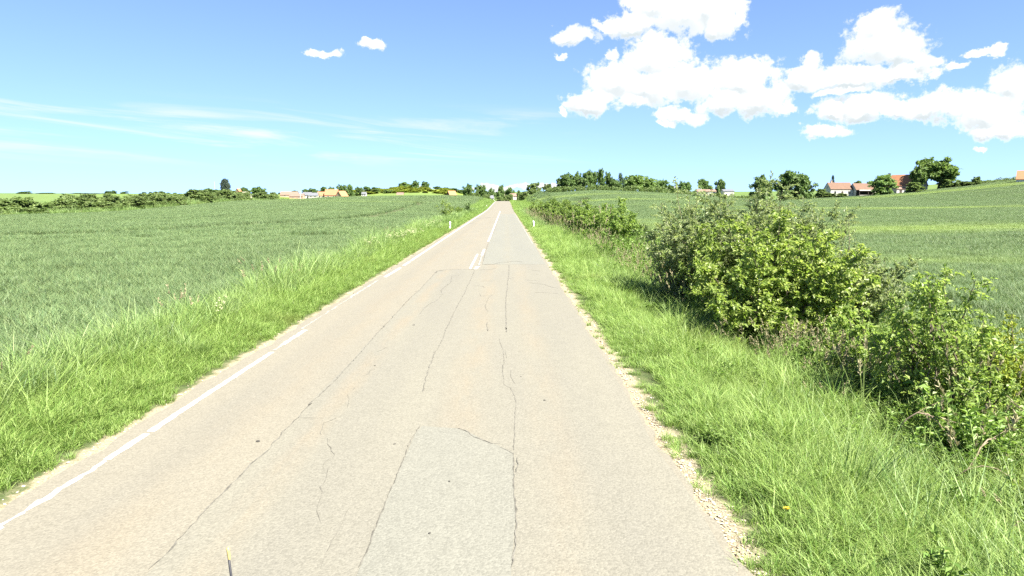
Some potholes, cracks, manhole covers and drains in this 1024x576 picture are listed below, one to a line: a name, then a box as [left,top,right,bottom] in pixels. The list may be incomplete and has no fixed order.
crack [420,268,517,449]
crack [317,371,370,566]
